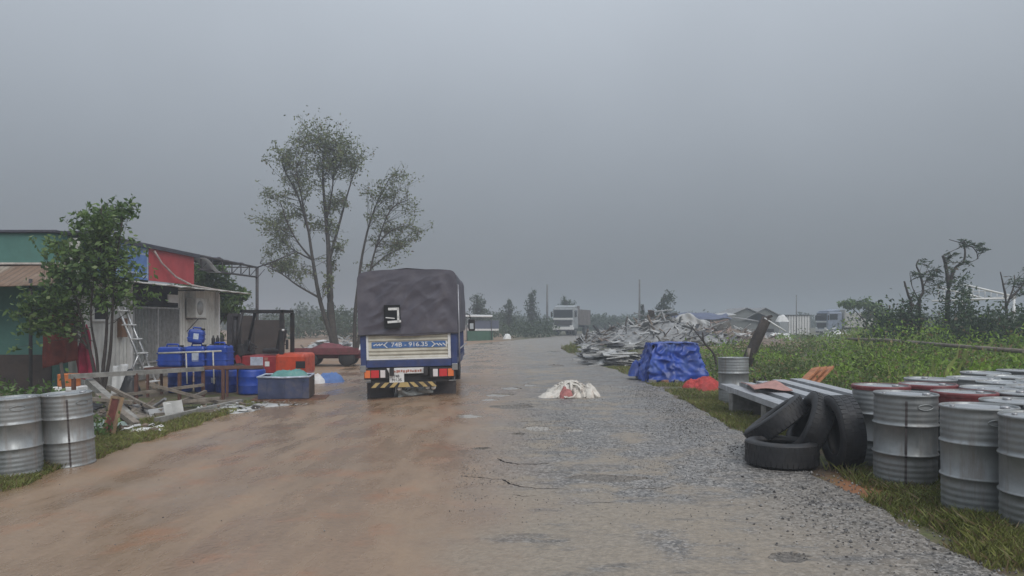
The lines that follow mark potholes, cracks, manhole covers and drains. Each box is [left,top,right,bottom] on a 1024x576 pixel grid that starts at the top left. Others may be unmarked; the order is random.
pothole [767,552,813,563]
crack [477,458,562,497]
